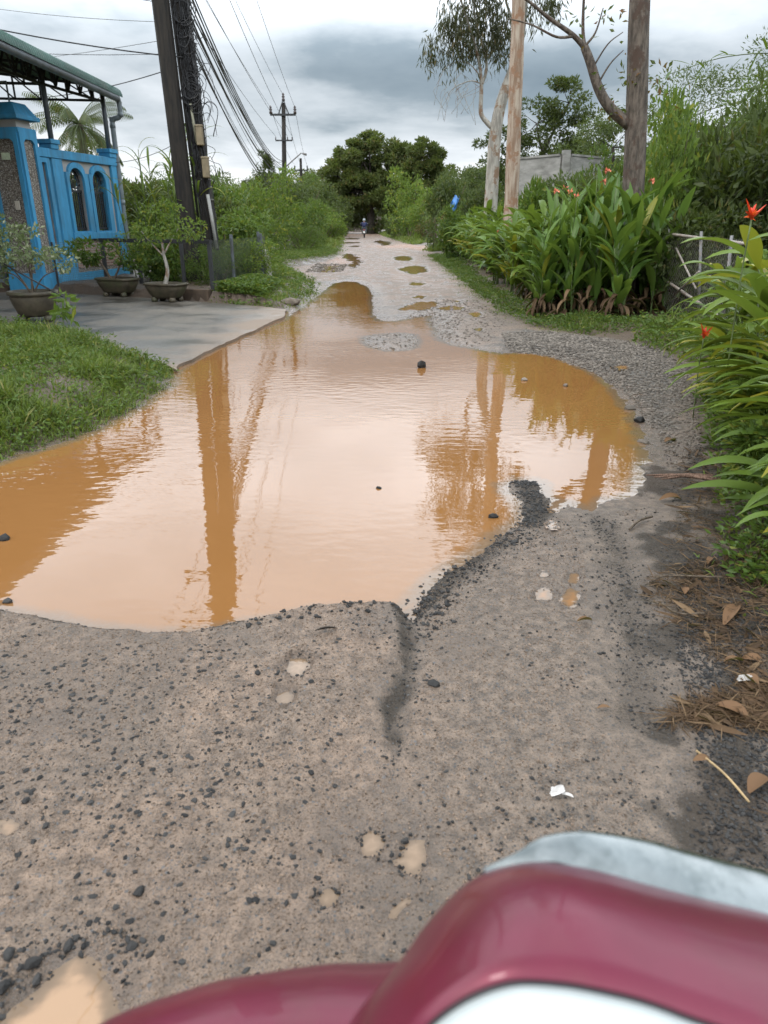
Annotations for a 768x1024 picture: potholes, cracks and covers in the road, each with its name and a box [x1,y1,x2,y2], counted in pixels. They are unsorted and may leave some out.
pothole [339,253,365,268]
pothole [0,281,661,636]
pothole [394,265,432,274]
crack [375,605,427,758]
